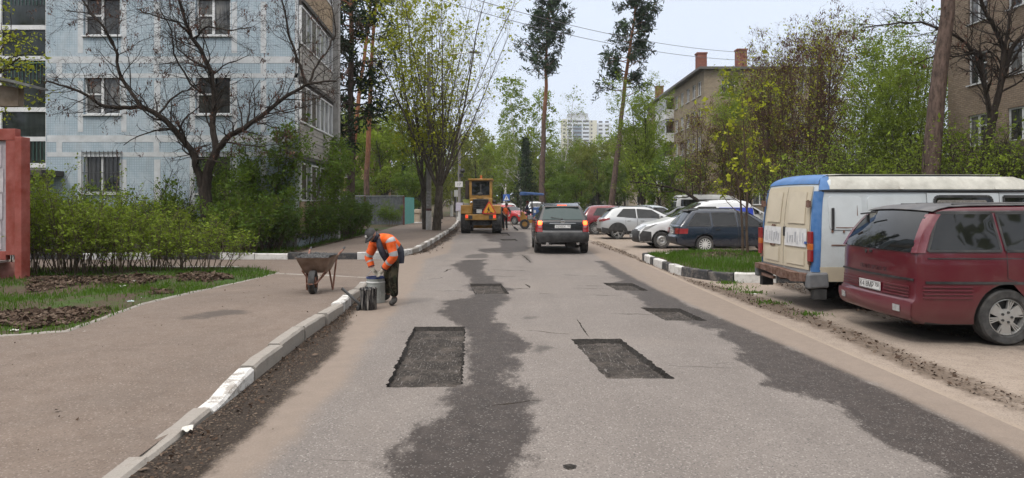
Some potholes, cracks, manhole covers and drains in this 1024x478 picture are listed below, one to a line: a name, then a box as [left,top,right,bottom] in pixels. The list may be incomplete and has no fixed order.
pothole [571,339,674,379]
pothole [604,283,648,291]
pothole [470,284,509,294]
pothole [386,326,466,388]
pothole [642,308,707,321]
